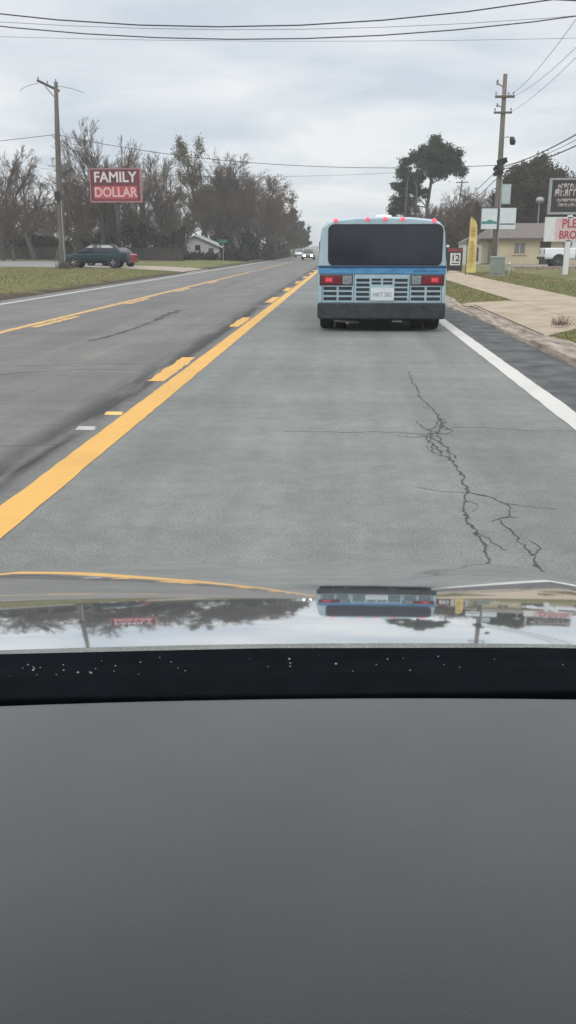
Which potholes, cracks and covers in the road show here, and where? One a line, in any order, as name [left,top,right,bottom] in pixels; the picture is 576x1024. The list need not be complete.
crack [285,371,561,572]
